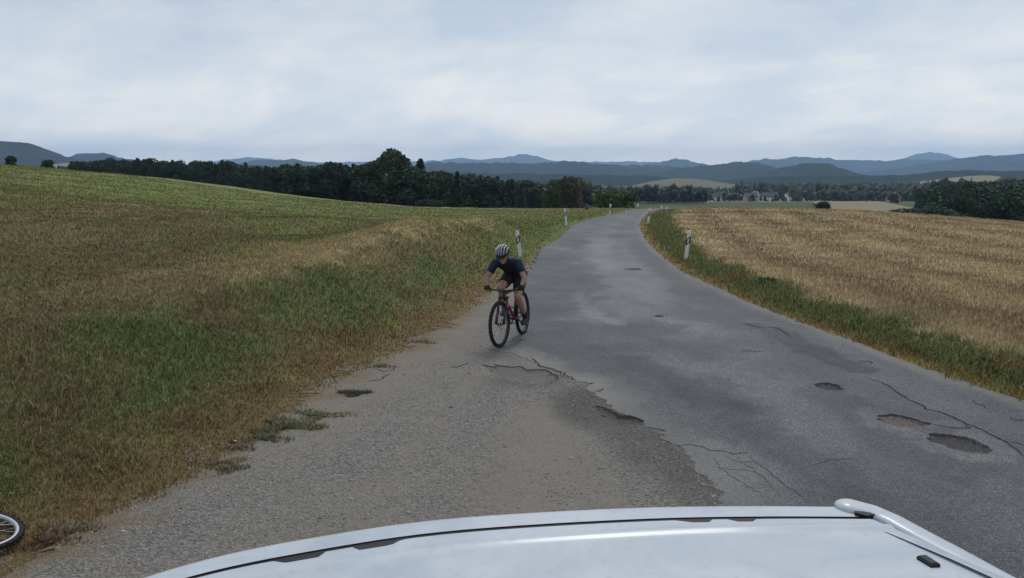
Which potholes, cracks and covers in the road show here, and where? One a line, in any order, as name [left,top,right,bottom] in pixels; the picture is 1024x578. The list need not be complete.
pothole [878,415,930,428]
crack [678,444,804,498]
crack [532,358,603,391]
crack [867,377,1023,455]
pothole [928,435,991,454]
pothole [595,407,643,425]
